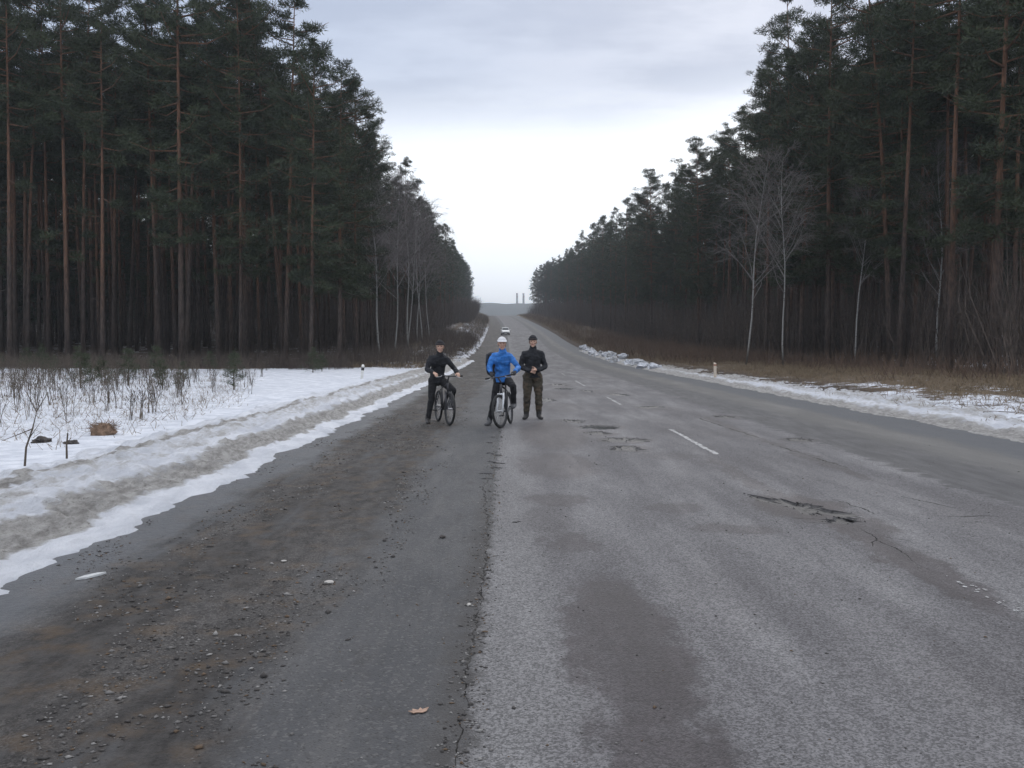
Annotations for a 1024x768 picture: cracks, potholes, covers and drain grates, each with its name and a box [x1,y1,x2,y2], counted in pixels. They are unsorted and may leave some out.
pothole [743,493,864,521]
crack [836,496,1001,522]
pothole [820,516,866,524]
